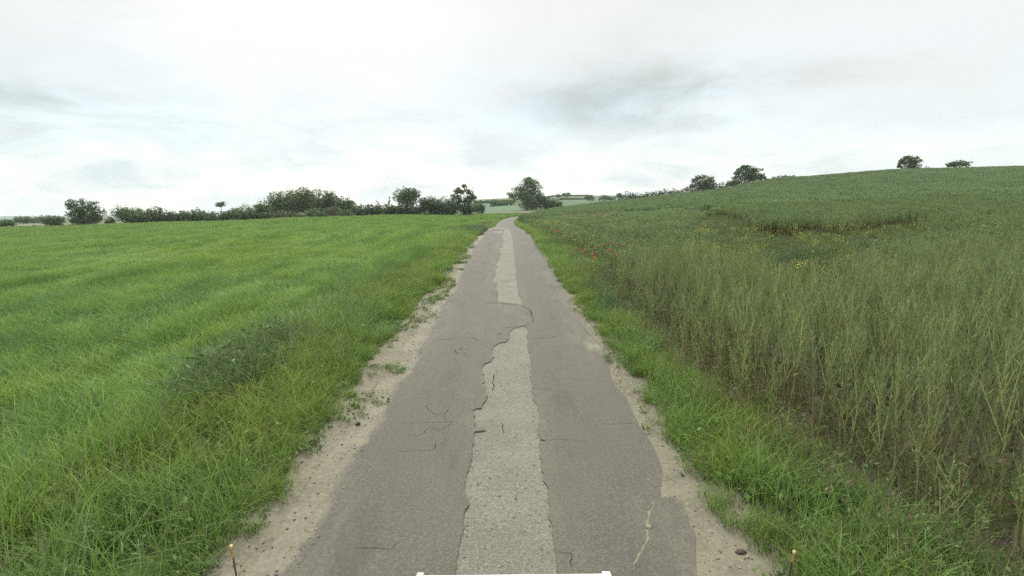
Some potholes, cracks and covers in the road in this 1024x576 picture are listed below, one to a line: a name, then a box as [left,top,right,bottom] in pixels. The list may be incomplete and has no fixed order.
crack [632,498,655,573]
